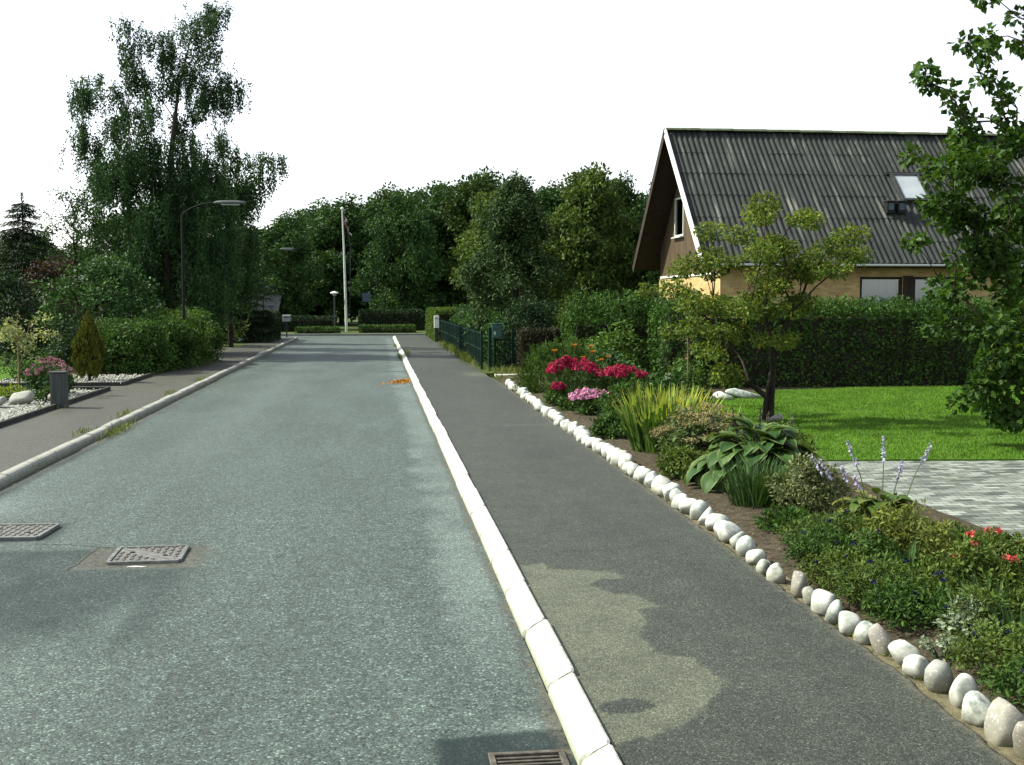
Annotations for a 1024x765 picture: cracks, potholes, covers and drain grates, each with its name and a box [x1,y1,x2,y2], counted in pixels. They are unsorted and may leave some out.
manhole cover [106,544,190,565]
drain grate [487,749,570,765]
manhole cover [0,523,60,541]
